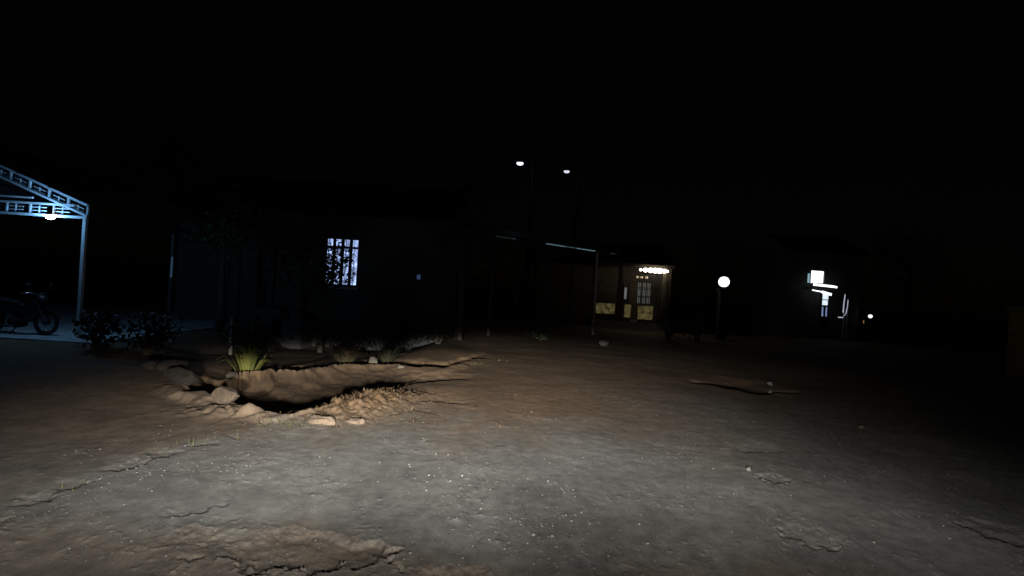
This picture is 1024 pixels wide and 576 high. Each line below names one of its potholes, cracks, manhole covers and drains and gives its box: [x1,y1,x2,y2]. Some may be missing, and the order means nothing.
crack [0,434,269,526]
pothole [681,374,814,398]
